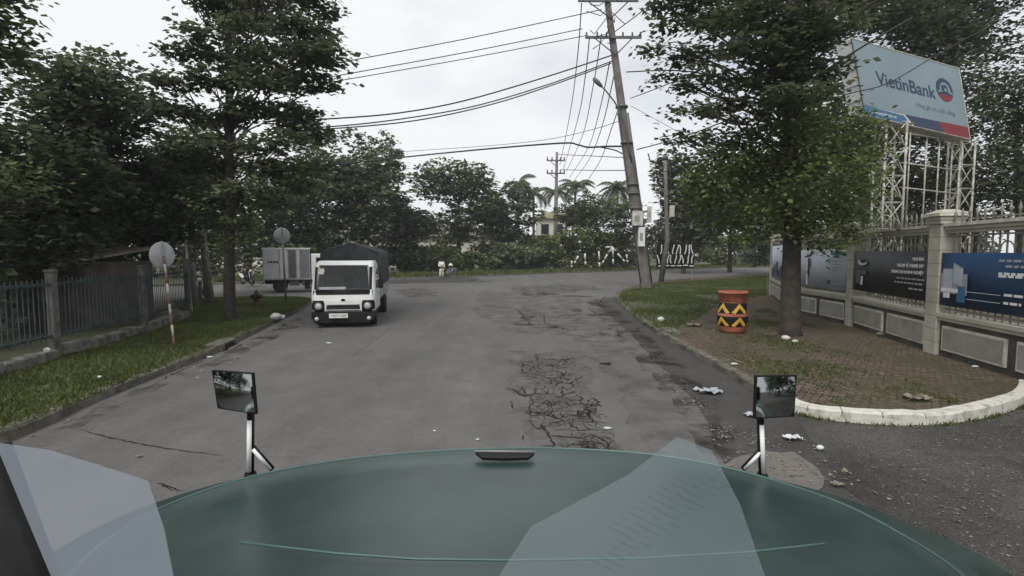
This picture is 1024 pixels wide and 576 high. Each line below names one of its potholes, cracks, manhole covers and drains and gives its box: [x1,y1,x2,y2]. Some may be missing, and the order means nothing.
crack [77,428,224,456]
crack [506,354,616,450]
crack [514,309,567,334]
